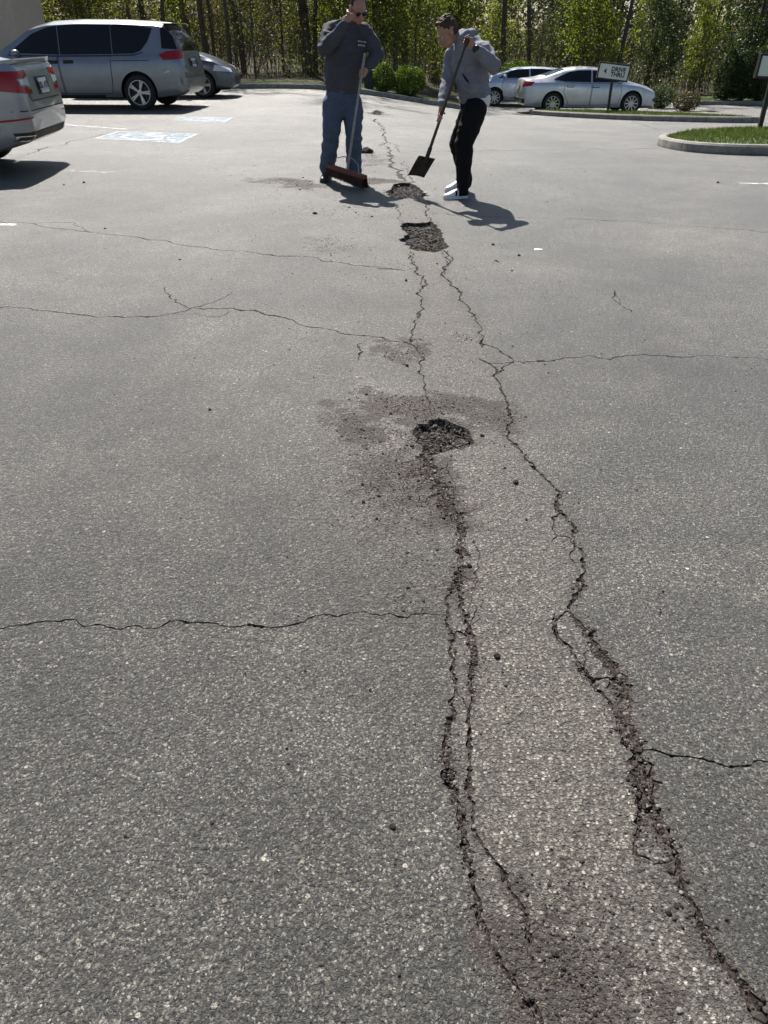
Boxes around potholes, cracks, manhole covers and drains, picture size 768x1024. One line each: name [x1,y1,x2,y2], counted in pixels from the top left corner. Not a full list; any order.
crack [425,202,768,1019]
crack [0,288,415,361]
crack [373,119,413,181]
crack [2,222,406,271]
pothole [412,419,474,453]
crack [0,612,437,630]
crack [394,203,544,1024]
pothole [399,222,449,253]
pothole [386,183,429,200]
